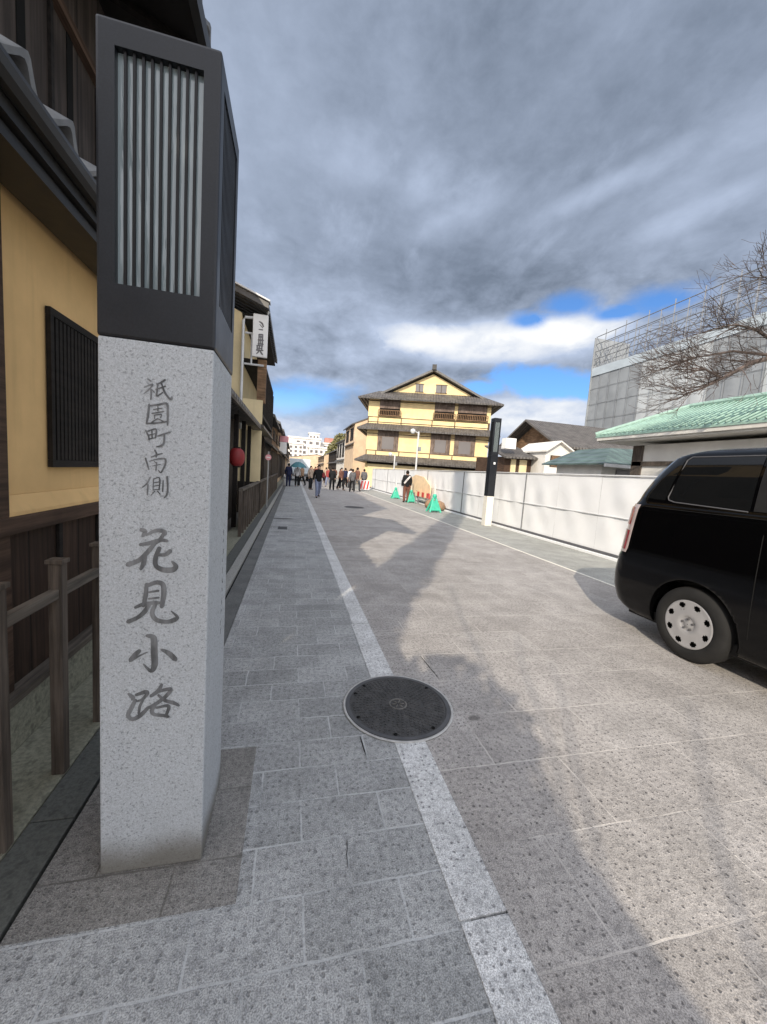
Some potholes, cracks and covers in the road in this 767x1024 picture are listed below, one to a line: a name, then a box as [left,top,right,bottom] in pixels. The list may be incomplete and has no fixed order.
manhole cover [343,675,453,743]
